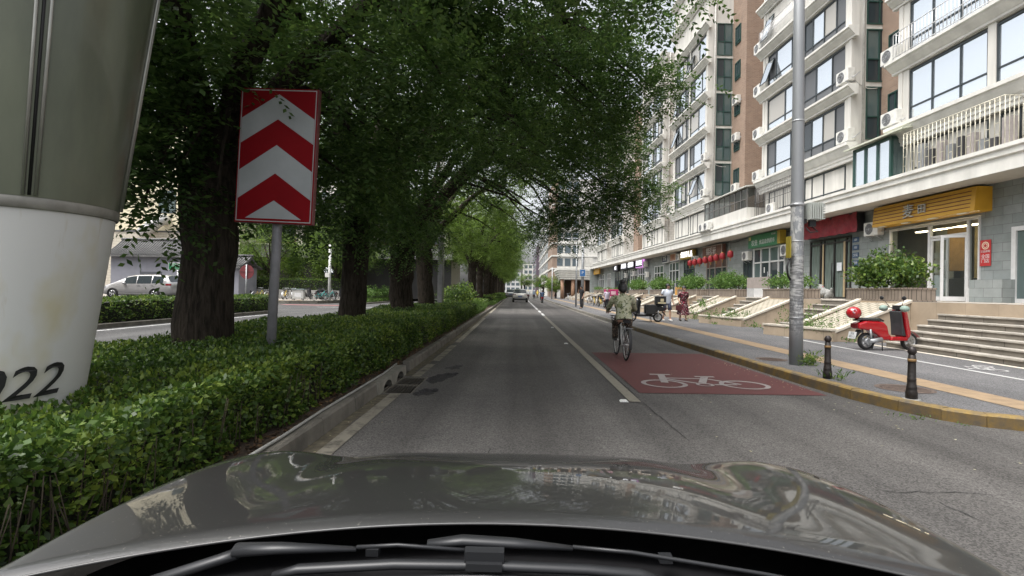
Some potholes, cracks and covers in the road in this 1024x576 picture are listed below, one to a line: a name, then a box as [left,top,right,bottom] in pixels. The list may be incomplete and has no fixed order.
manhole cover [874,384,937,393]
crack [874,489,990,523]
drain grate [383,377,428,394]
drain grate [372,365,406,395]
